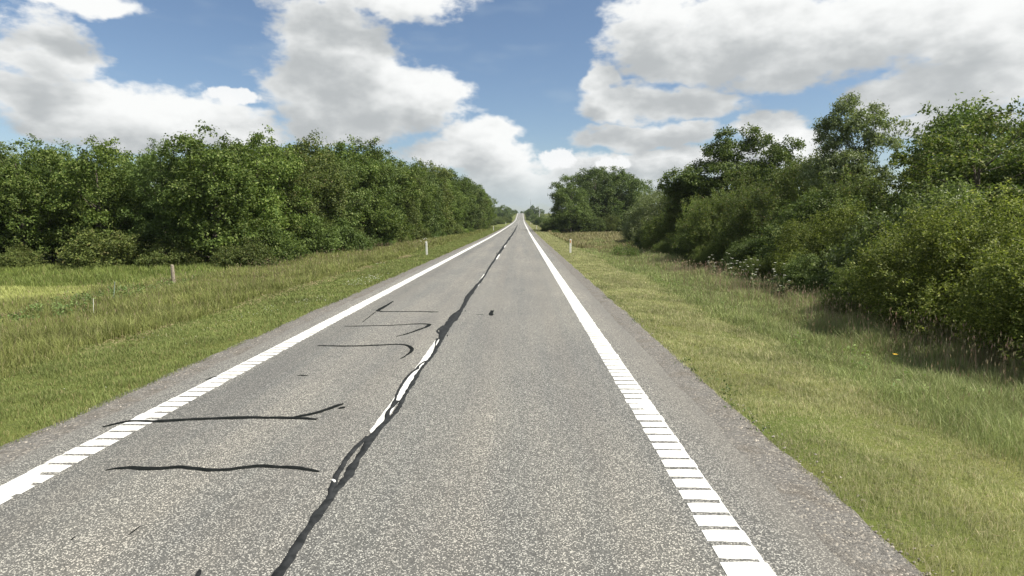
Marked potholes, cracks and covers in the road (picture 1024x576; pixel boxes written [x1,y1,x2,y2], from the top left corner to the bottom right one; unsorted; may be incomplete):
crack [106,464,319,472]
crack [297,301,433,376]
crack [102,403,345,427]
